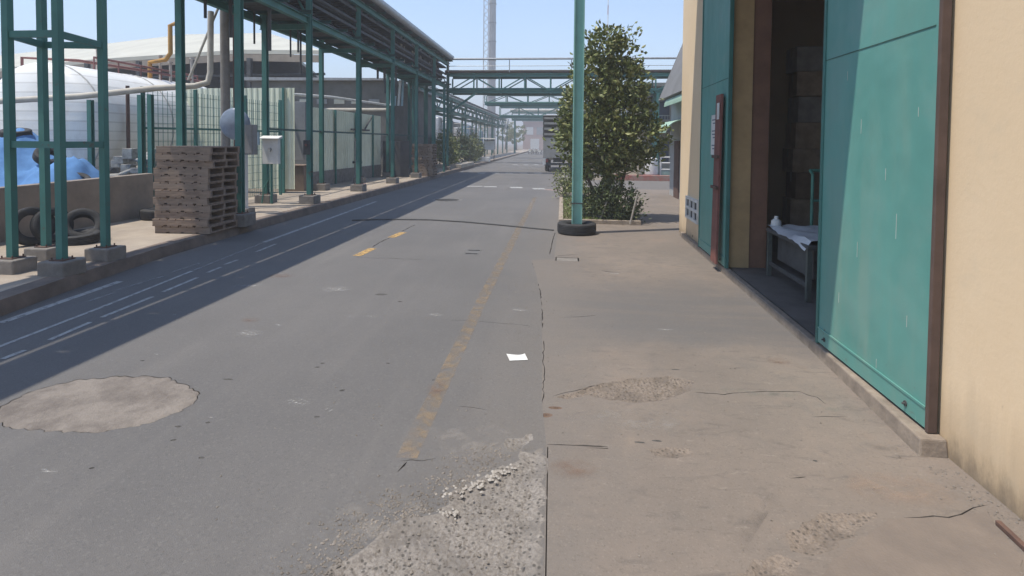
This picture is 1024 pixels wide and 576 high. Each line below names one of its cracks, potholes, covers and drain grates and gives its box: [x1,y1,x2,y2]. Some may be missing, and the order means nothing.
pothole [553,376,694,403]
pothole [649,447,695,459]
pothole [324,448,548,576]
crack [904,505,985,518]
pothole [785,512,878,556]
pothole [736,554,800,576]
pothole [503,433,533,452]
crack [697,391,836,417]
